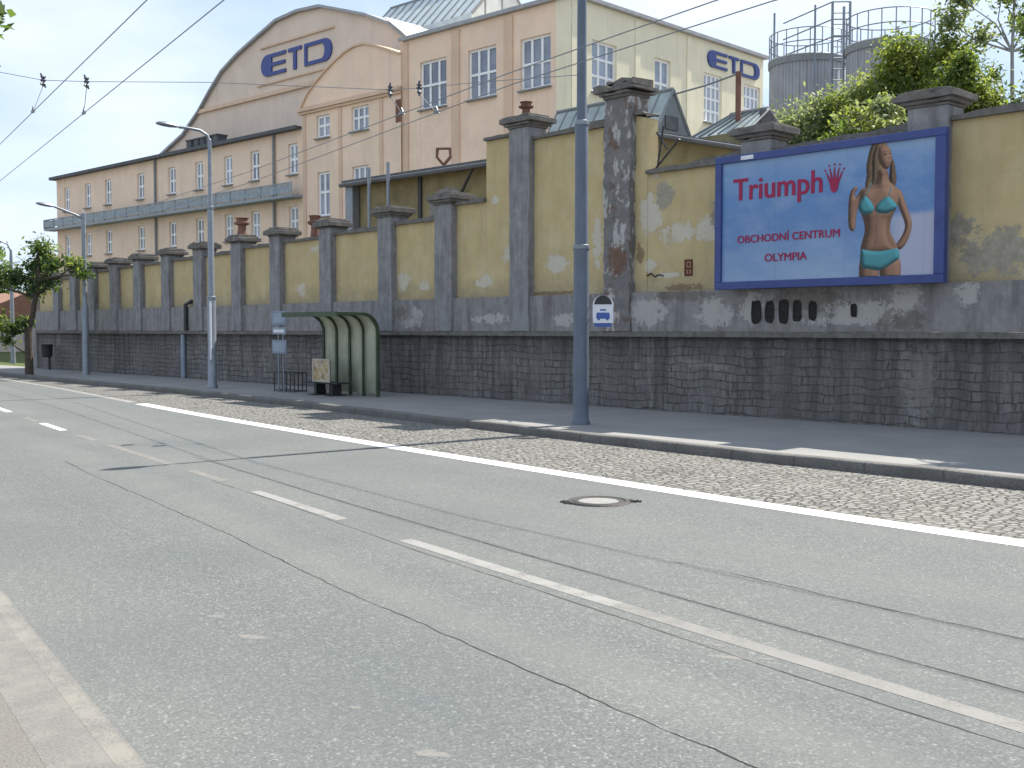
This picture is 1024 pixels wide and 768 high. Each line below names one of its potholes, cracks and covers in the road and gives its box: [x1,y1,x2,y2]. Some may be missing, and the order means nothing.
manhole cover [567,496,631,507]
